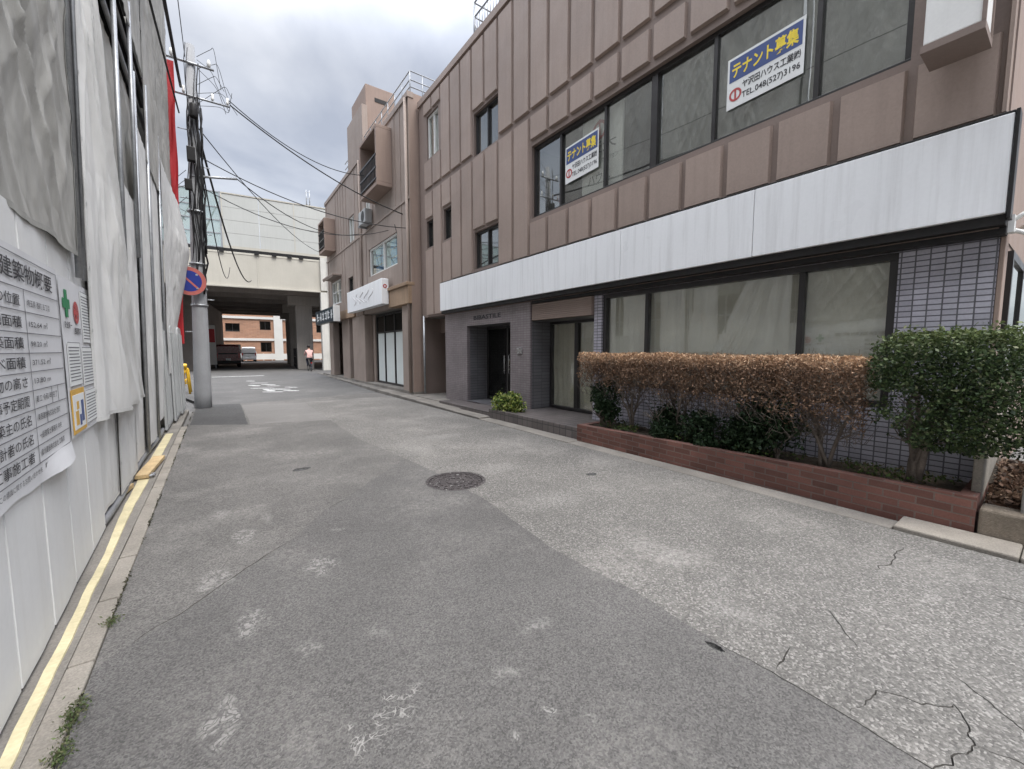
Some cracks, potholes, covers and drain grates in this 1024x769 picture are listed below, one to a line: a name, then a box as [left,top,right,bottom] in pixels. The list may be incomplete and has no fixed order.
manhole cover [425,472,486,491]
crack [849,673,1024,769]
